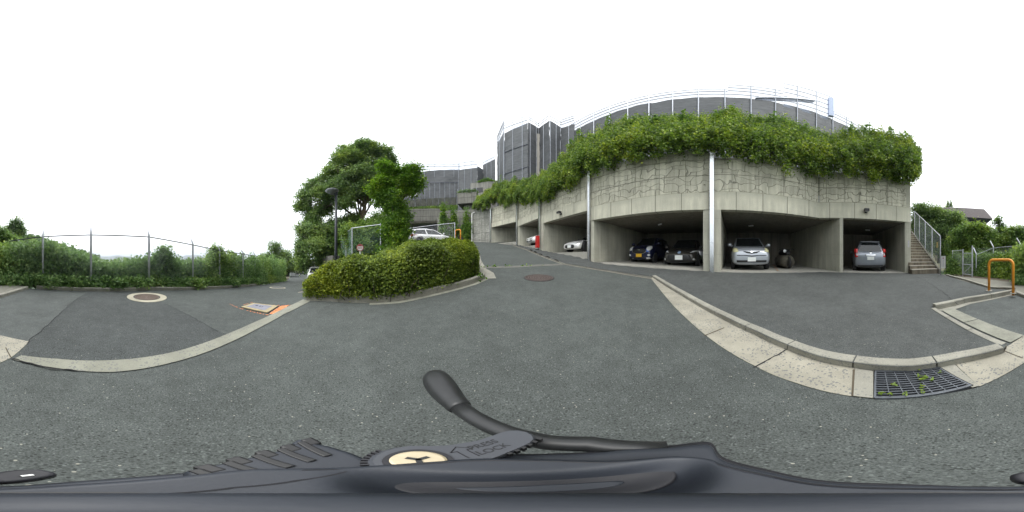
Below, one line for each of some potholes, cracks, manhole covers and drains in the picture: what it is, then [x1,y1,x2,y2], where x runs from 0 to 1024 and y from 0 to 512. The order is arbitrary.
manhole cover [127,293,167,302]
manhole cover [524,274,554,282]
drain grate [871,366,974,399]
utility cover [241,303,279,314]
